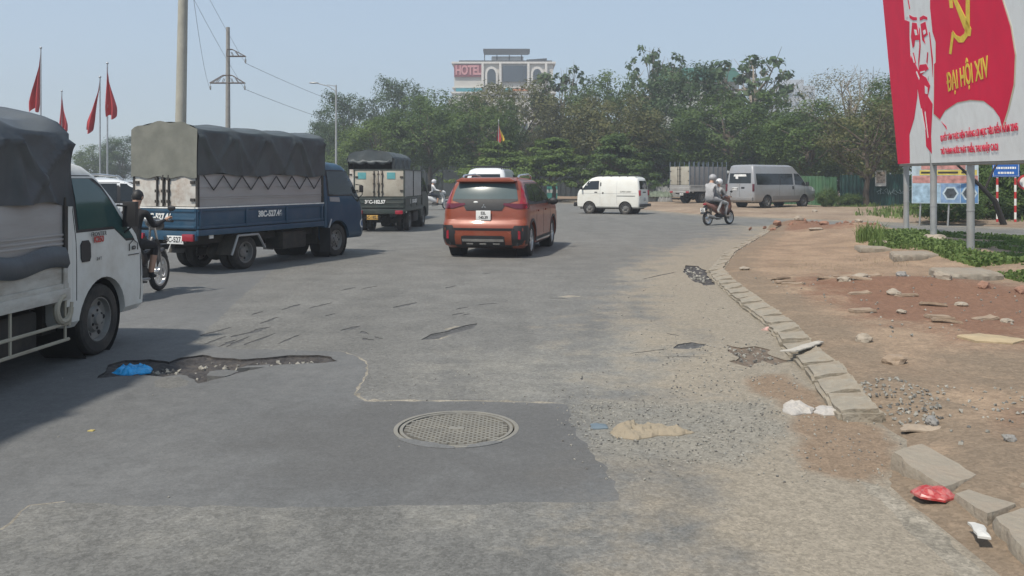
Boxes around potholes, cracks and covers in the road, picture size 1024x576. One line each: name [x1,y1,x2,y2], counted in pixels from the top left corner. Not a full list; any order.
crack [200,286,382,347]
pothole [97,355,336,384]
pothole [727,345,787,367]
manhole cover [393,411,519,449]
pothole [683,265,715,285]
pothole [422,324,477,340]
